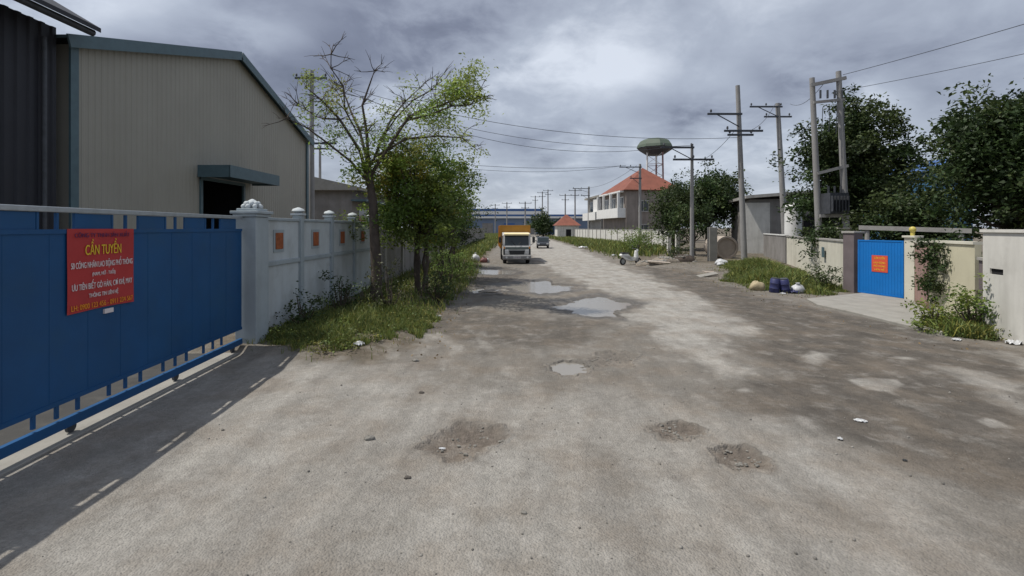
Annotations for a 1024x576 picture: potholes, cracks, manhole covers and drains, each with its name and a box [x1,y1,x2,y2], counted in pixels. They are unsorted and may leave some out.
pothole [645,419,711,443]
pothole [406,419,517,468]
pothole [543,359,595,377]
pothole [539,293,645,320]
pothole [703,443,777,475]
